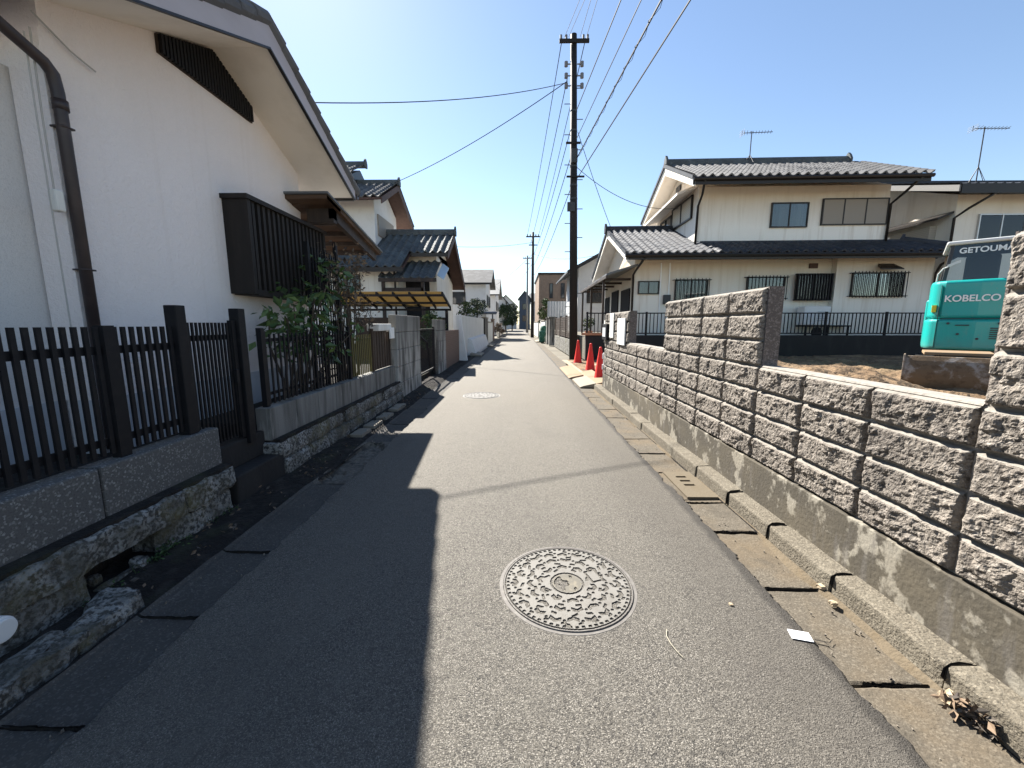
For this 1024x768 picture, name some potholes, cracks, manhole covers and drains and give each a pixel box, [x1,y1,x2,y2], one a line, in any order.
manhole cover [500,547,638,636]
